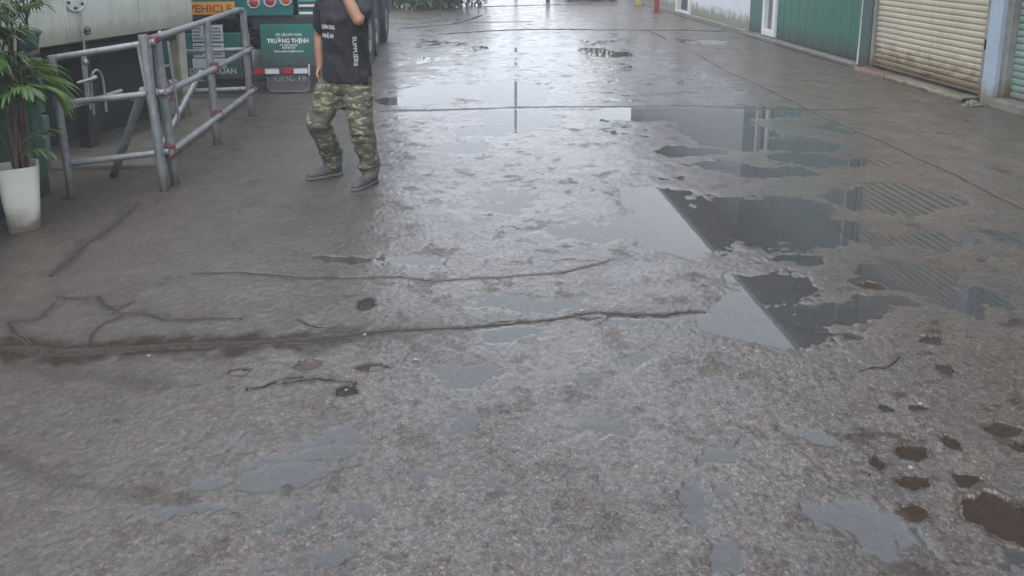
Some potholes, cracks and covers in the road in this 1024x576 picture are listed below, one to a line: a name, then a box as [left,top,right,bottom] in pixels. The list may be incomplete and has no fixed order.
pothole [891,442,933,463]
pothole [951,481,1024,554]
pothole [893,501,933,524]
pothole [936,432,968,454]
crack [0,261,705,357]
pothole [888,473,935,492]
pothole [947,471,992,491]
crack [49,206,136,275]
pothole [978,418,1024,439]
crack [248,376,355,390]
